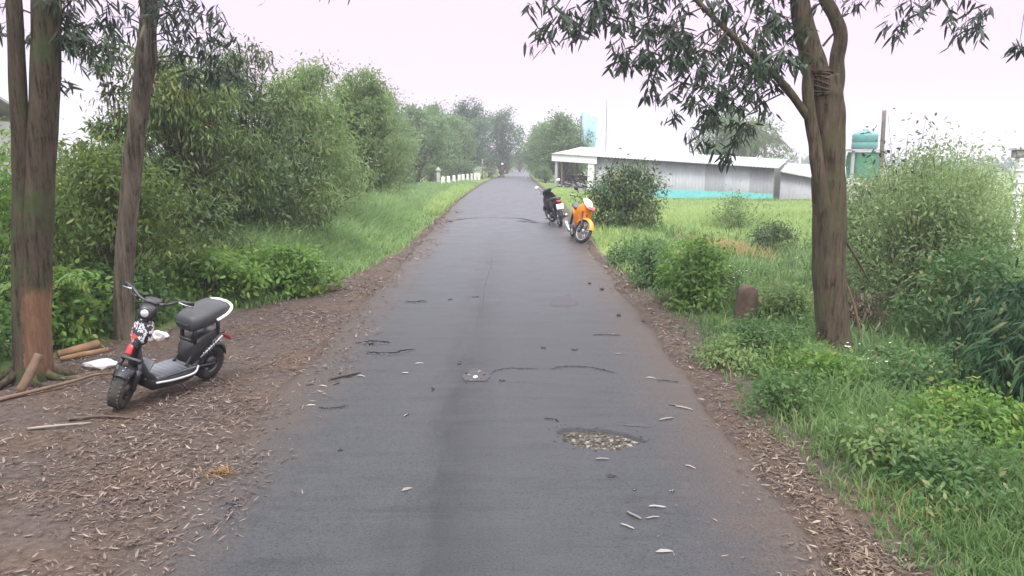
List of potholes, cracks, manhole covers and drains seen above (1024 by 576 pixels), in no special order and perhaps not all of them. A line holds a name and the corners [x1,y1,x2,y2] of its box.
pothole [548,424,651,453]
crack [490,365,616,374]
crack [355,340,416,356]
pothole [462,369,490,384]
